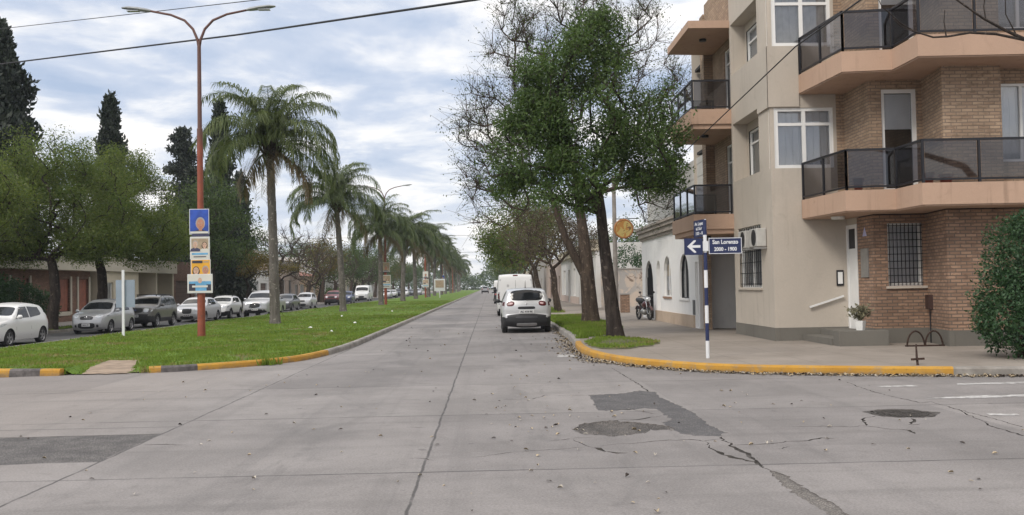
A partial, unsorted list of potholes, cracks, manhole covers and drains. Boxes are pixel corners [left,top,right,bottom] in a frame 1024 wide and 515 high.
crack [479,382,1024,470]
